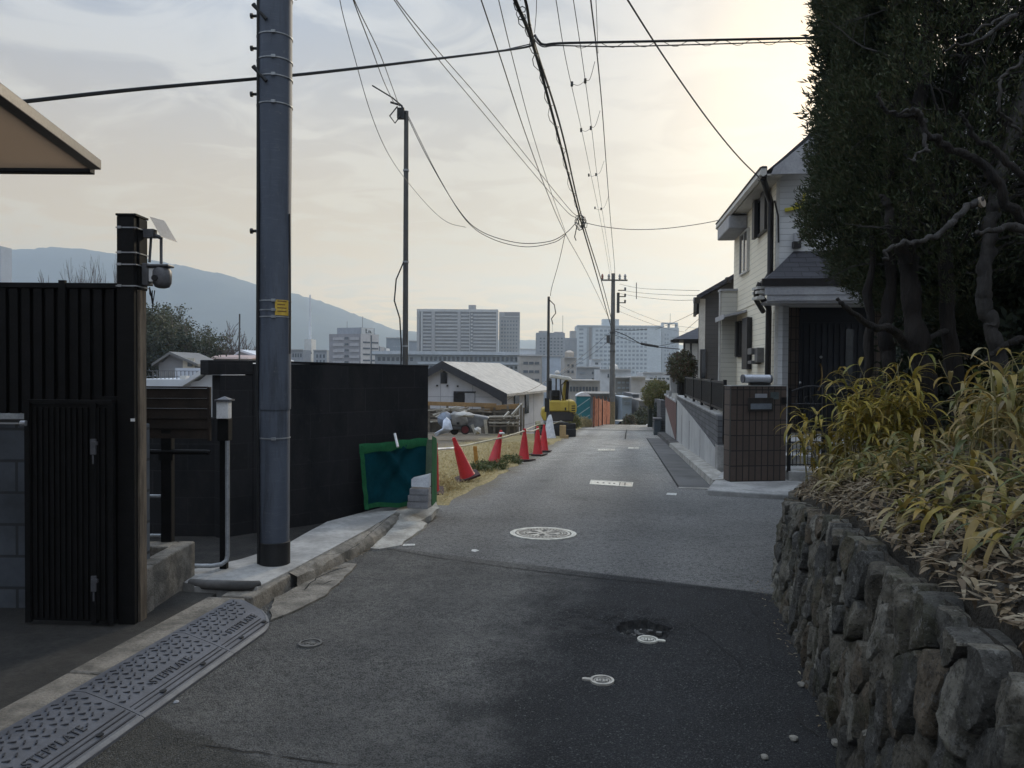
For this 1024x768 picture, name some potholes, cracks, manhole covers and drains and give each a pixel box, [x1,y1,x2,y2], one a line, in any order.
utility cover [637,635,666,644]
utility cover [298,638,322,648]
manhole cover [510,527,576,540]
utility cover [582,675,614,686]
pothole [615,619,673,638]
